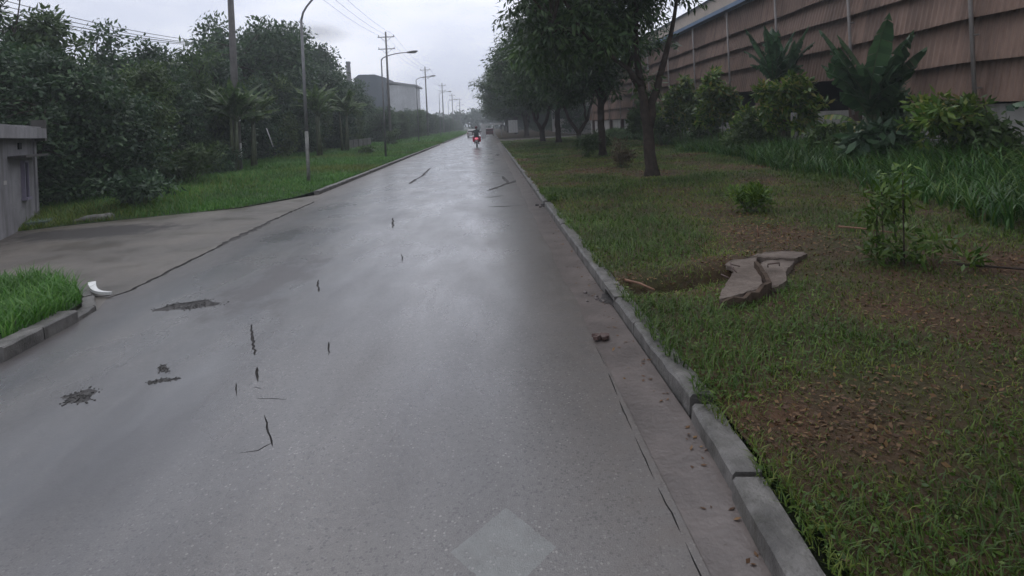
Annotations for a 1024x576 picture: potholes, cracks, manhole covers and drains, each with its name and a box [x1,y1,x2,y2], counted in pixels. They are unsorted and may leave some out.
pothole [151,299,229,312]
pothole [59,386,103,406]
crack [235,324,286,453]
